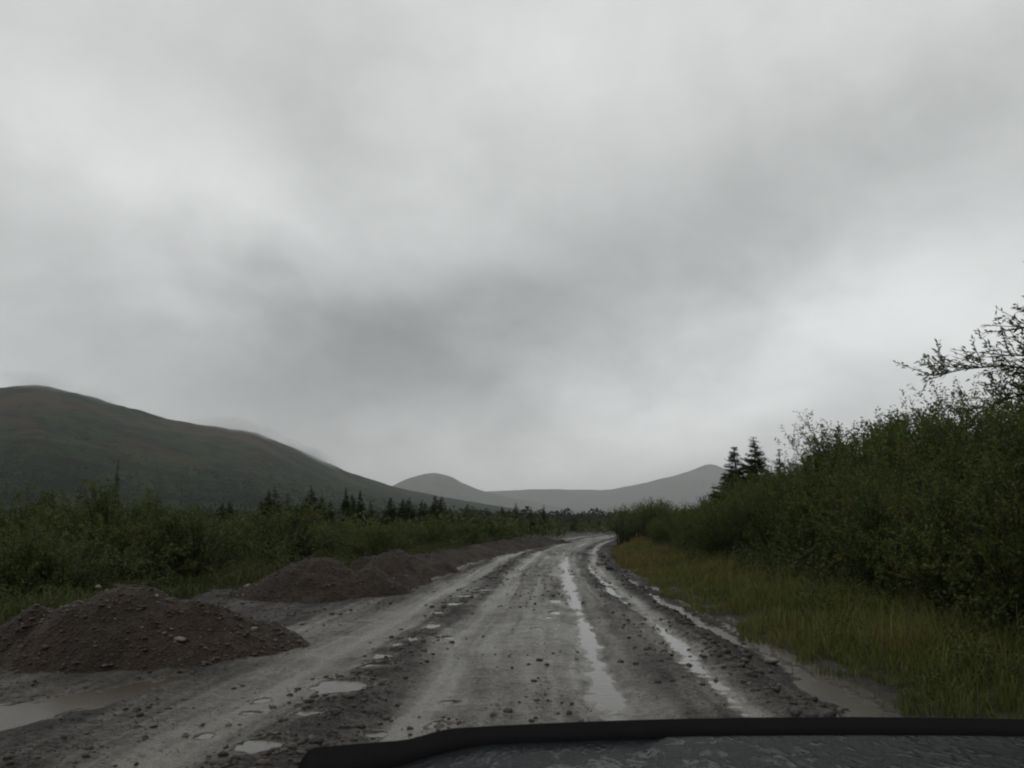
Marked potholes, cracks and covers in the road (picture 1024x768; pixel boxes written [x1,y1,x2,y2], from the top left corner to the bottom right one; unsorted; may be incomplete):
pothole [226,735,306,755]
pothole [303,675,380,695]
